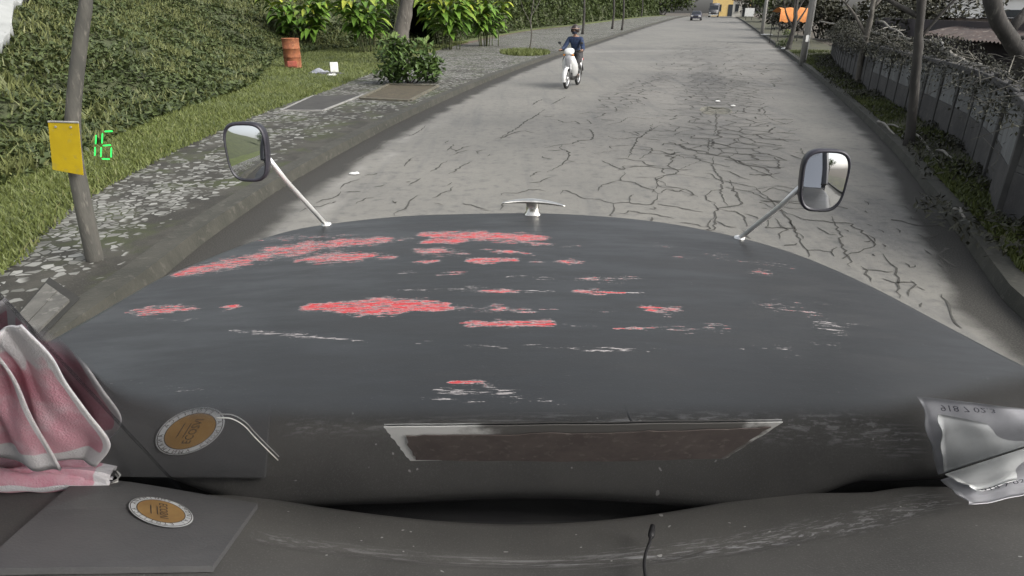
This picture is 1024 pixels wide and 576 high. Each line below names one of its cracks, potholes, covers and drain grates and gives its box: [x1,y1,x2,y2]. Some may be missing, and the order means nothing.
utility cover [280,94,364,111]
crack [300,40,955,307]
crack [941,294,962,328]
